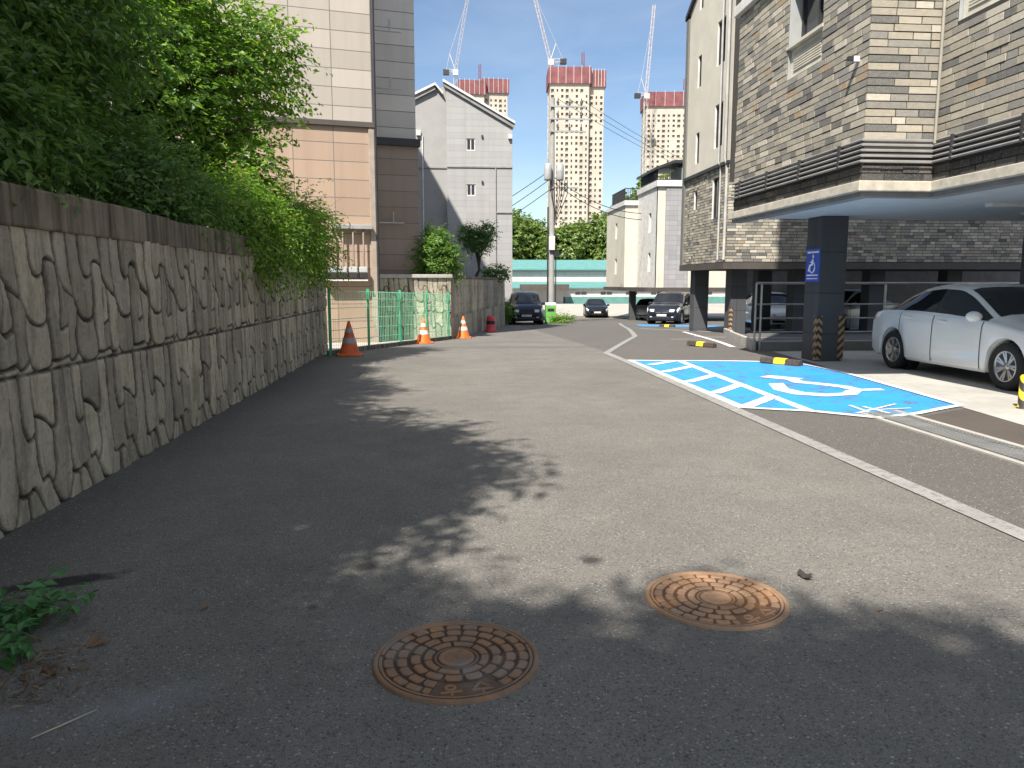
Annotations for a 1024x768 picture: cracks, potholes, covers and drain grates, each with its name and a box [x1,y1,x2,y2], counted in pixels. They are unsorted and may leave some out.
manhole cover [372,621,540,705]
manhole cover [645,571,790,631]
